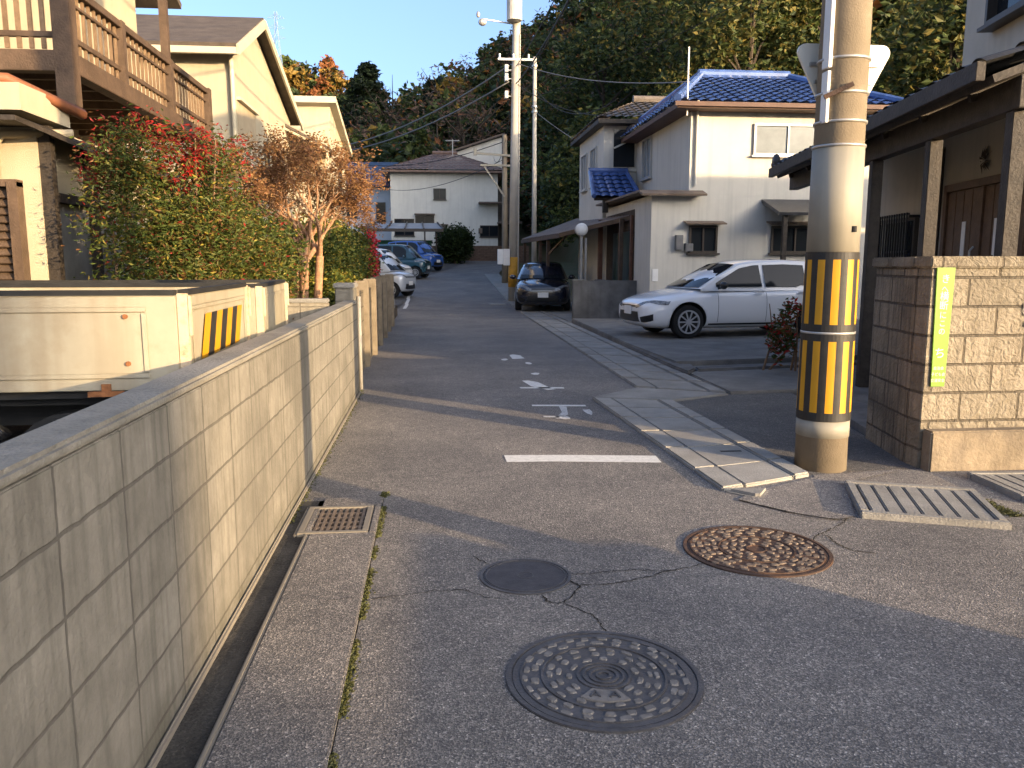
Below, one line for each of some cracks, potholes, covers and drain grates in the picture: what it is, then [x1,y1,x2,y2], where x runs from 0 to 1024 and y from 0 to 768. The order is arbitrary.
manhole cover [683,525,834,578]
crack [739,499,874,553]
crack [542,563,704,631]
drain grate [297,505,374,543]
manhole cover [480,558,571,595]
manhole cover [506,631,704,734]
